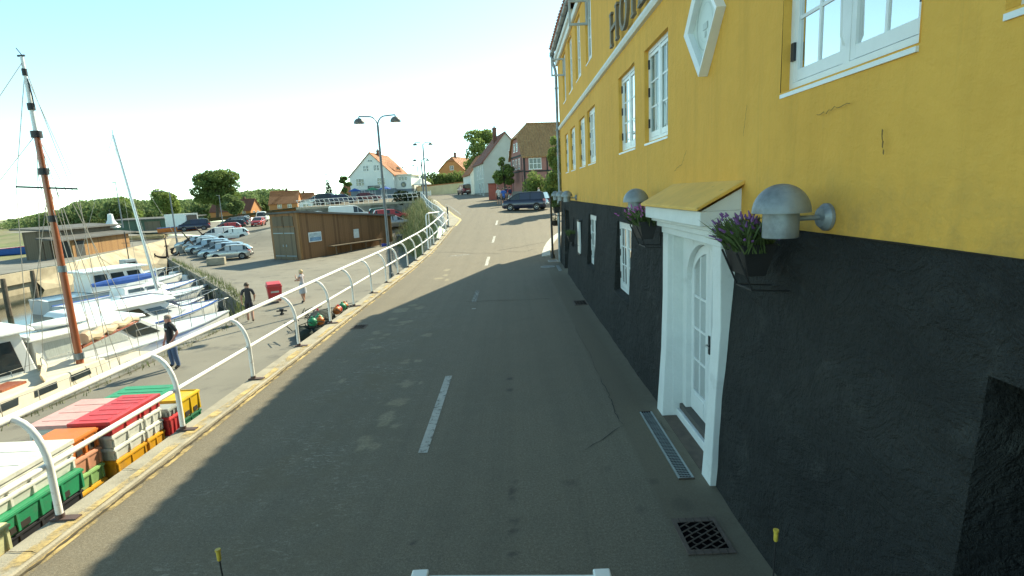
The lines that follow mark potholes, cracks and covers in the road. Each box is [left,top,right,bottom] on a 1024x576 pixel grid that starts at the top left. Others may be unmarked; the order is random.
drain grate [671,517,737,556]
crack [585,381,624,450]
